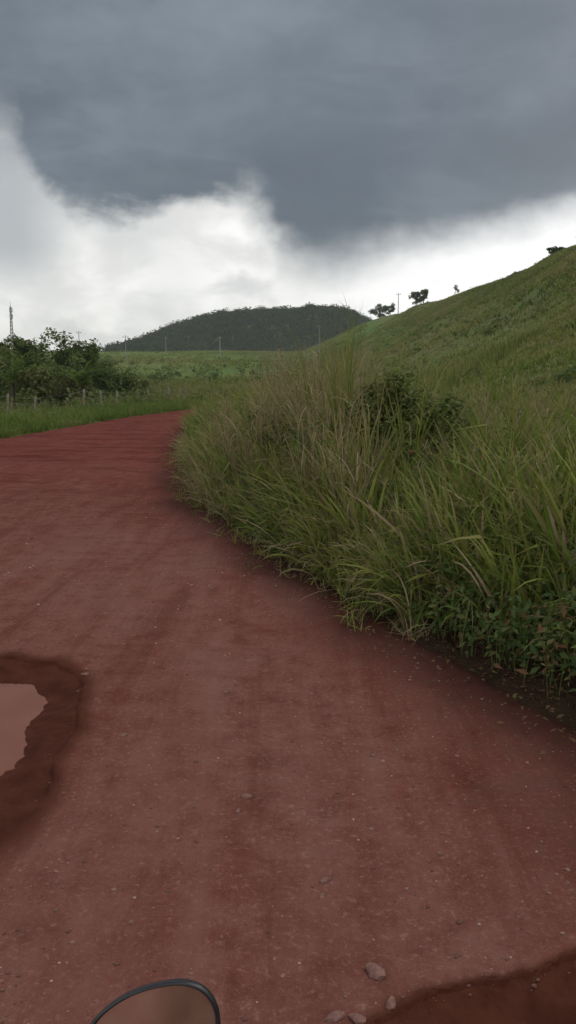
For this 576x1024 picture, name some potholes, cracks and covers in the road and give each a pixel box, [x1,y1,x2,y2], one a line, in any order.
pothole [0,652,92,853]
pothole [365,949,576,1024]
